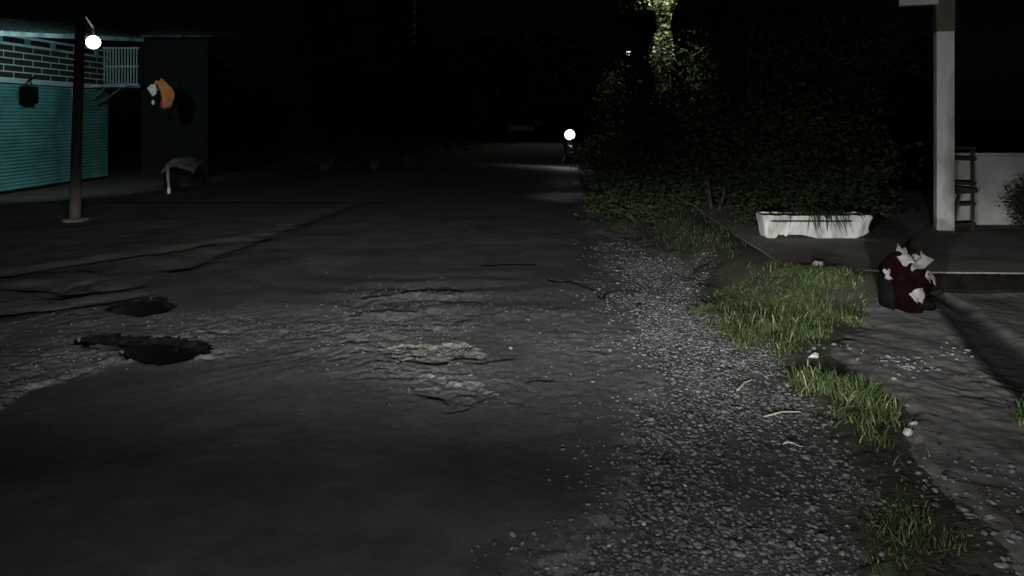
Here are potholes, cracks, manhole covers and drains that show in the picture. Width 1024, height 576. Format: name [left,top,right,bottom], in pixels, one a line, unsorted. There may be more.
crack [482,263,636,299]
pothole [106,296,178,317]
crack [350,286,463,316]
pothole [73,333,214,366]
